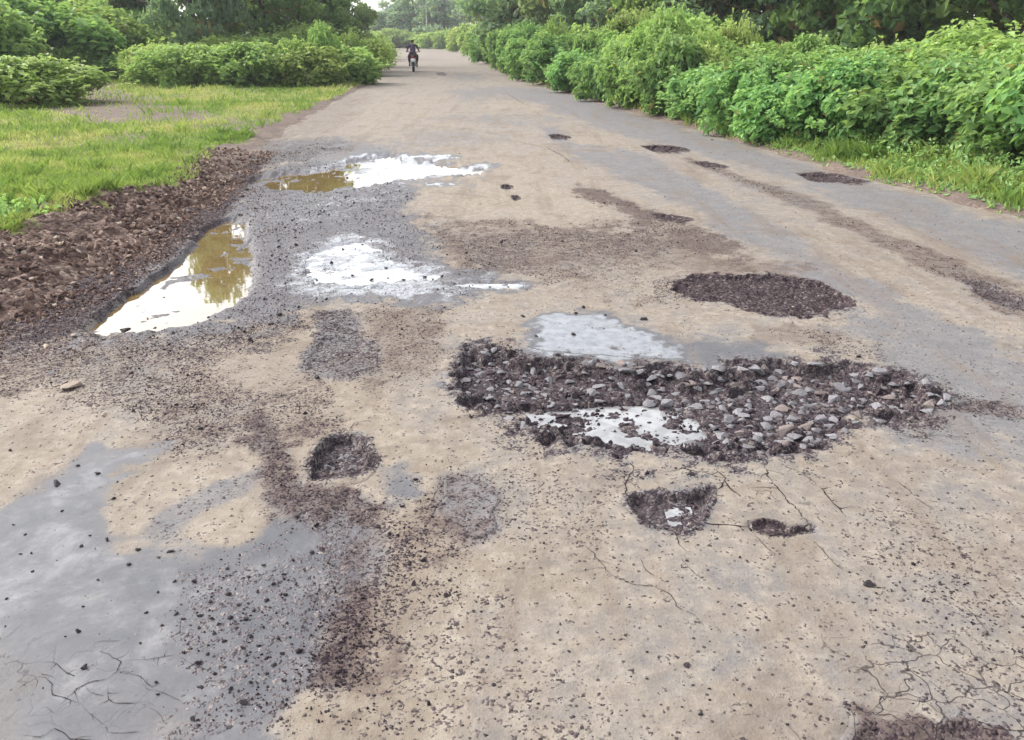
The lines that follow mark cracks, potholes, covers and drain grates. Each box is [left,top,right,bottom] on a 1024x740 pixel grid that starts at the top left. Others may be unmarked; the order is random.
pothole [307,432,382,485]
pothole [440,336,974,475]
crack [659,462,740,495]
crack [869,667,960,714]
pothole [622,482,717,534]
pothole [795,172,873,186]
pothole [749,518,815,536]
crack [582,550,696,616]
pothole [641,145,690,154]
crack [22,643,207,740]
crack [704,522,775,554]
crack [761,467,846,523]
